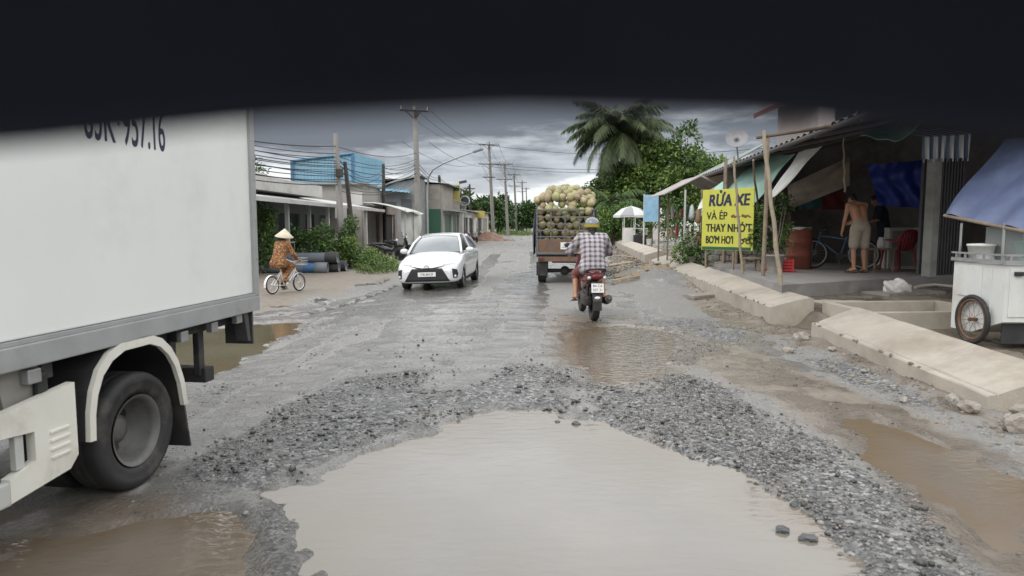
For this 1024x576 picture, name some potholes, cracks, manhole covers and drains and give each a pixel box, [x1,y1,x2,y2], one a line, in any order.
pothole [176,319,308,375]
pothole [835,411,1024,565]
pothole [246,402,881,576]
pothole [0,500,279,576]
pothole [557,324,682,387]
